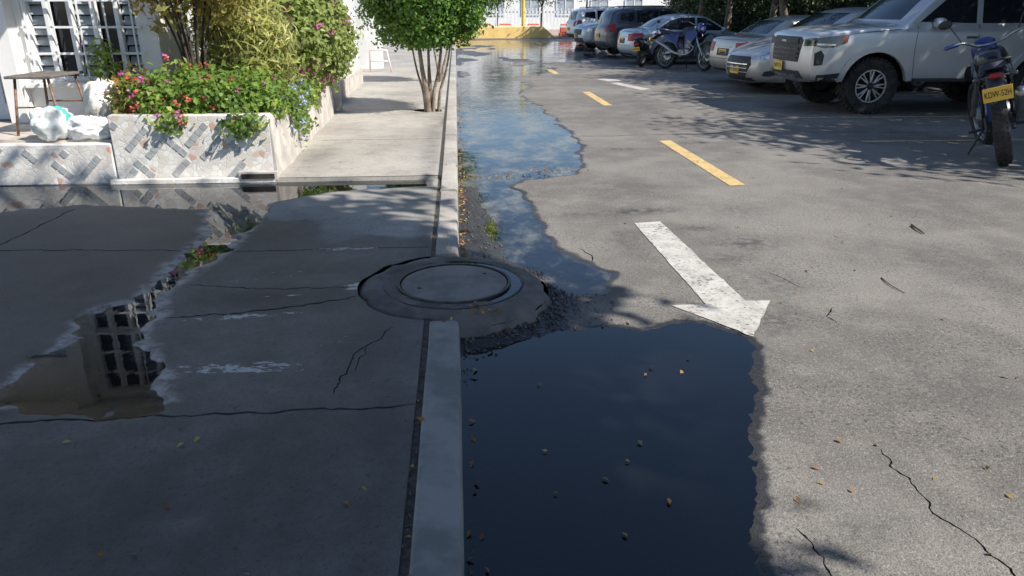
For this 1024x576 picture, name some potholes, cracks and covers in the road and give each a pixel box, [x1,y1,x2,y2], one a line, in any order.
manhole cover [357,256,553,338]
crack [333,329,389,394]
crack [881,450,1016,576]
crack [169,285,361,318]
crack [796,528,832,576]
